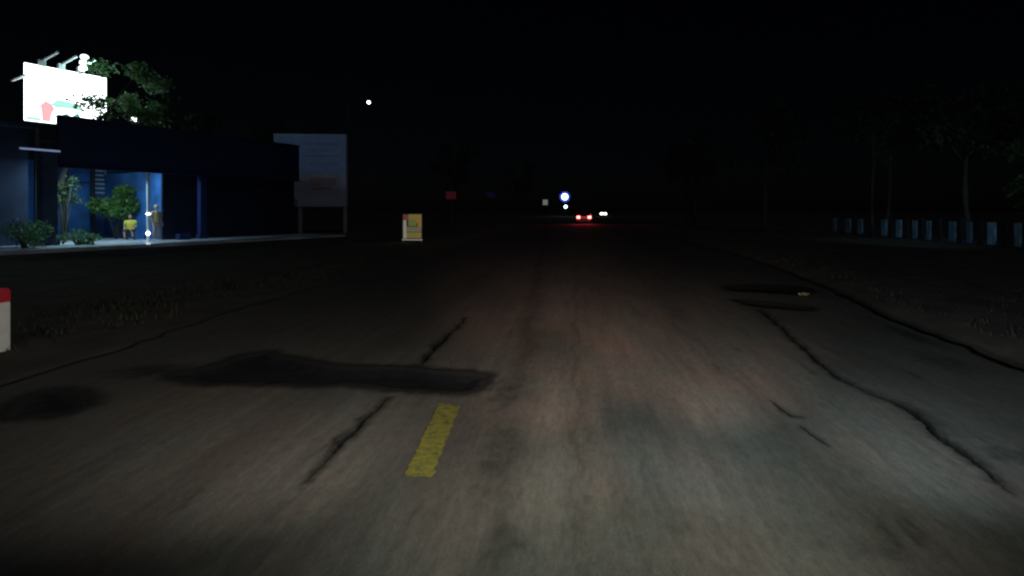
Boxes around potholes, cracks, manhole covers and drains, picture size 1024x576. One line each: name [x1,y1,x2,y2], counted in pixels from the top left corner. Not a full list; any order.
pothole [168,352,488,393]
pothole [4,390,90,417]
pothole [726,285,812,294]
crack [421,317,466,364]
crack [754,308,1013,494]
pothole [734,300,813,310]
crack [305,397,389,482]
